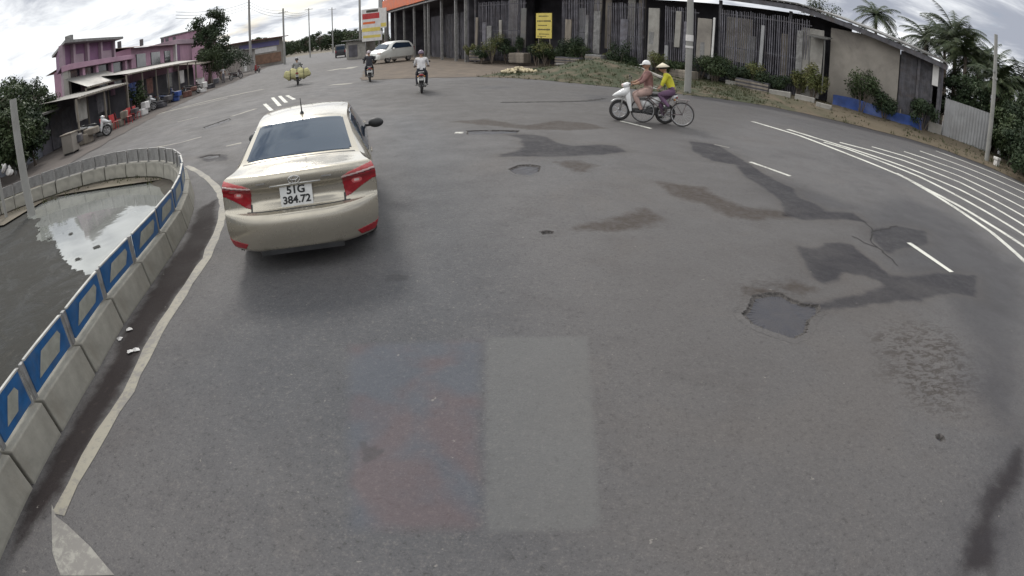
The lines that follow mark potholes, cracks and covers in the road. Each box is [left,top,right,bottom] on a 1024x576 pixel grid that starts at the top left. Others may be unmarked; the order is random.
crack [852,218,898,266]
pothole [733,289,827,344]
pothole [503,163,545,177]
